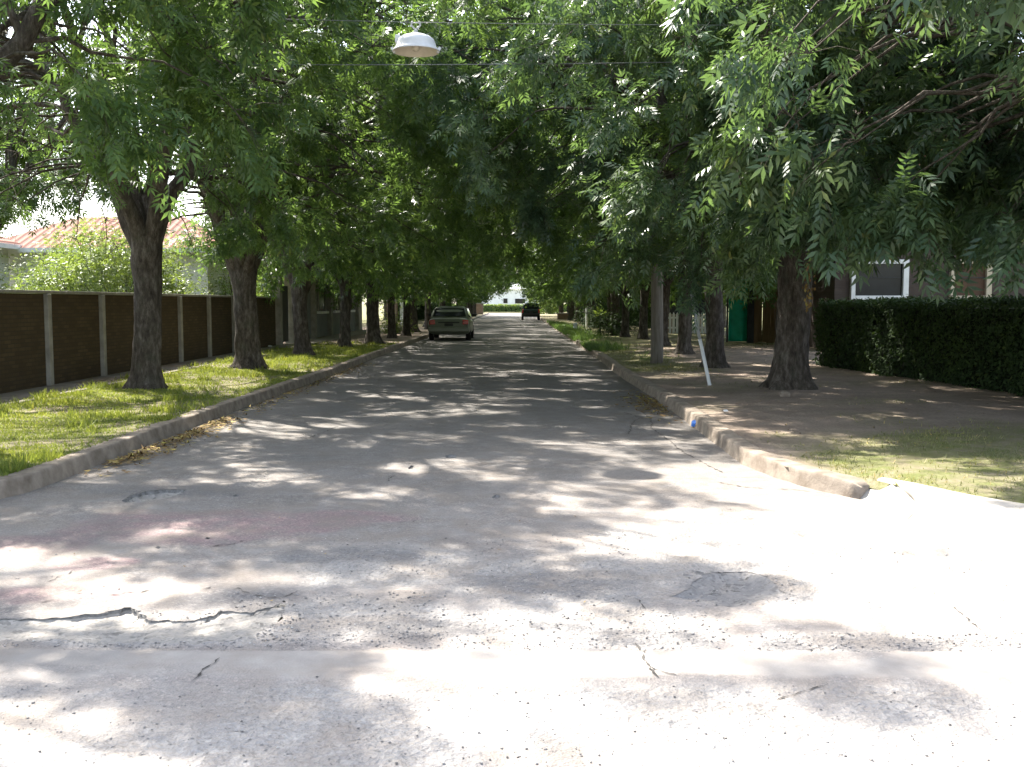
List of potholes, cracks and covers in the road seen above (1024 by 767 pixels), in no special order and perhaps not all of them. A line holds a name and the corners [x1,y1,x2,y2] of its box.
pothole [669,568,798,607]
pothole [122,489,185,503]
crack [624,412,722,472]
crack [635,643,676,676]
